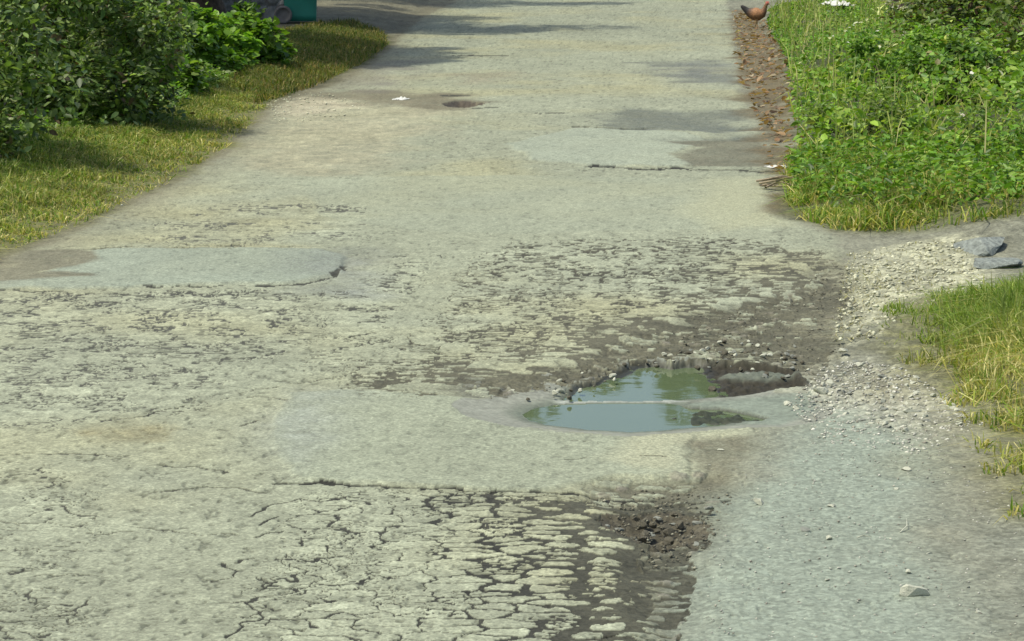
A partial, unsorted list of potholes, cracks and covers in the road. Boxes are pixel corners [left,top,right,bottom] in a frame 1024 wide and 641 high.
crack [0,452,732,641]
pothole [452,356,834,437]
crack [0,202,857,430]
crack [586,163,775,173]
pothole [442,100,485,108]
